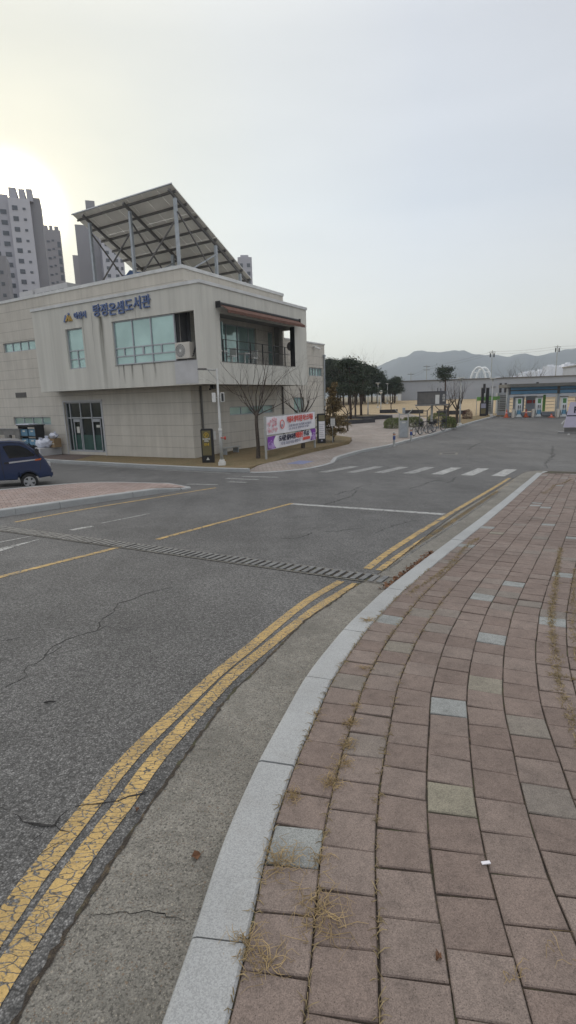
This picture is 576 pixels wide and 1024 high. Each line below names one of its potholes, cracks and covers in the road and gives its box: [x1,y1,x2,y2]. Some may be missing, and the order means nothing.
drain grate [0,526,392,584]
crack [1,787,157,860]
crack [91,910,185,921]
crack [7,586,175,686]
